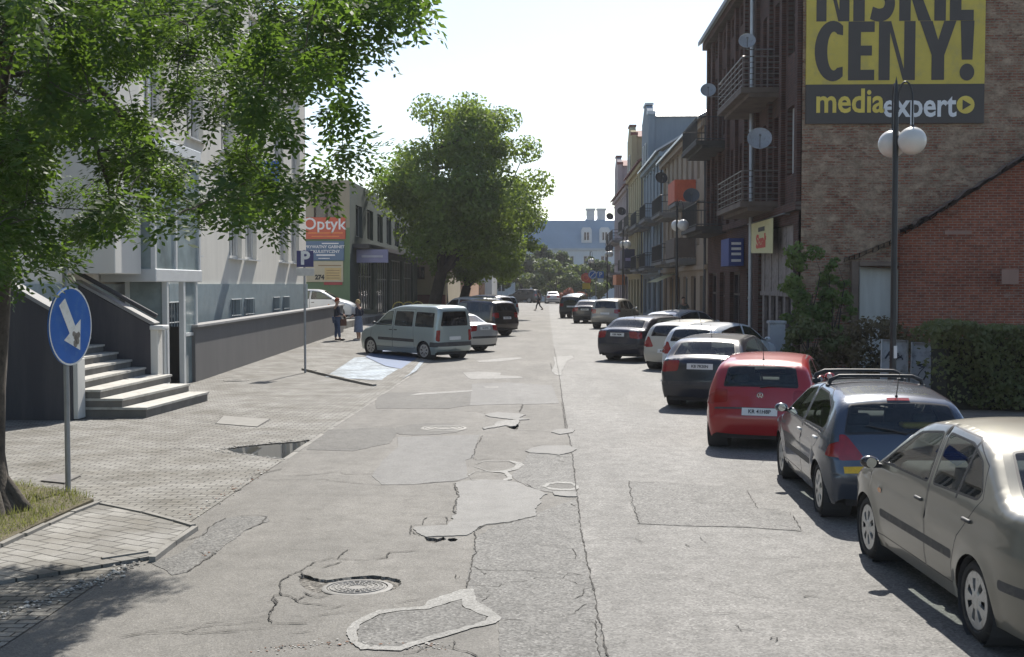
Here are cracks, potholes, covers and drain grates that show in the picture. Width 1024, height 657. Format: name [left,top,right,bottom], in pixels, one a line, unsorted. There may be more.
manhole cover [321,579,393,596]
crack [123,472,460,646]
